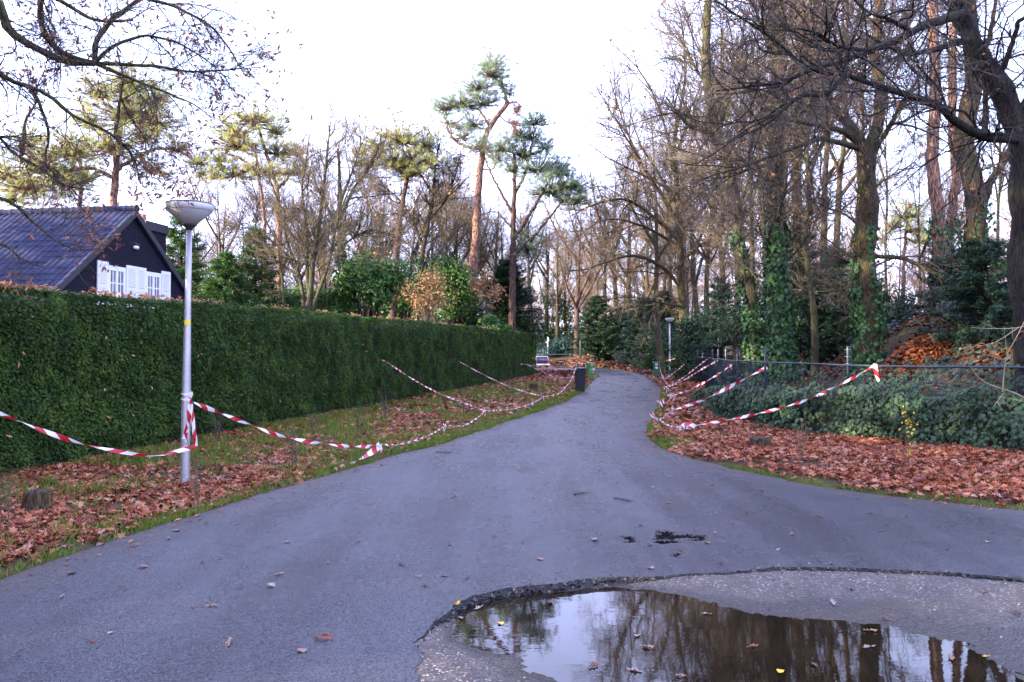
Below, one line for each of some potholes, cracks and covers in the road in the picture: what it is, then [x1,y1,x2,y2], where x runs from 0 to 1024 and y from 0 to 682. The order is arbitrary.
pothole [413,566,1024,682]
pothole [648,529,708,544]
pothole [614,535,637,543]
